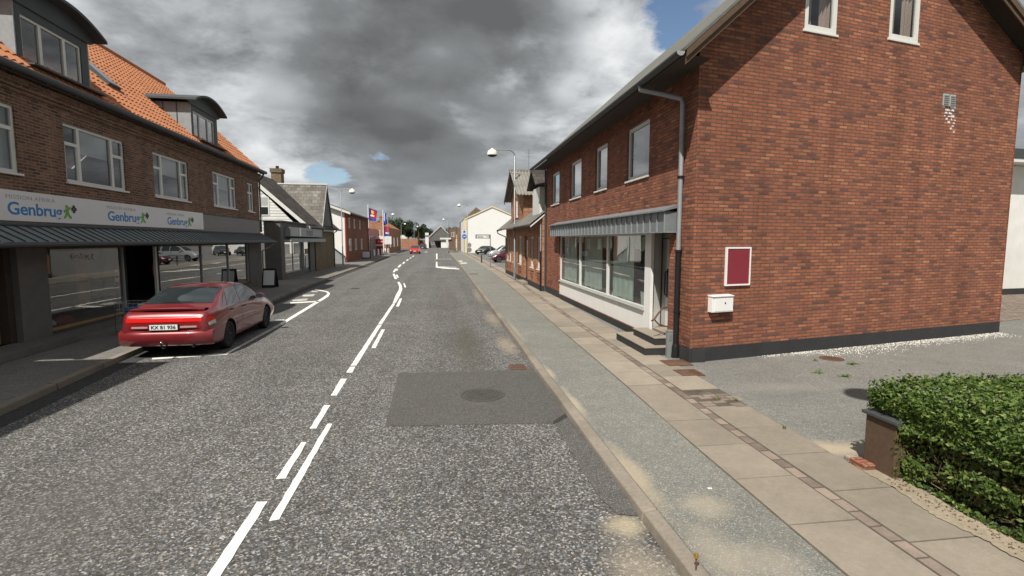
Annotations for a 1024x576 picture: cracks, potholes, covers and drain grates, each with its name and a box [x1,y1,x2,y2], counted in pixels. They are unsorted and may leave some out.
manhole cover [460,388,505,402]
